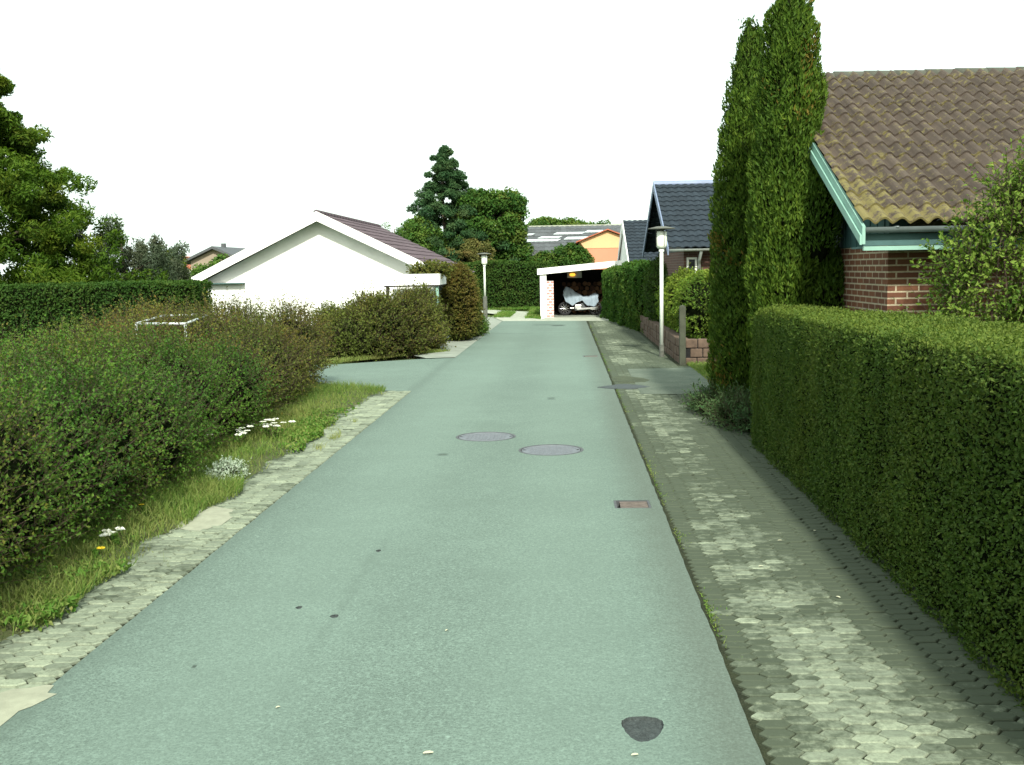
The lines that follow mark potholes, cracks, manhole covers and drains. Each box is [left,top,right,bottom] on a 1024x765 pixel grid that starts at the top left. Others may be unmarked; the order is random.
drain grate [613,500,652,508]
manhole cover [456,432,516,441]
manhole cover [518,444,584,456]
